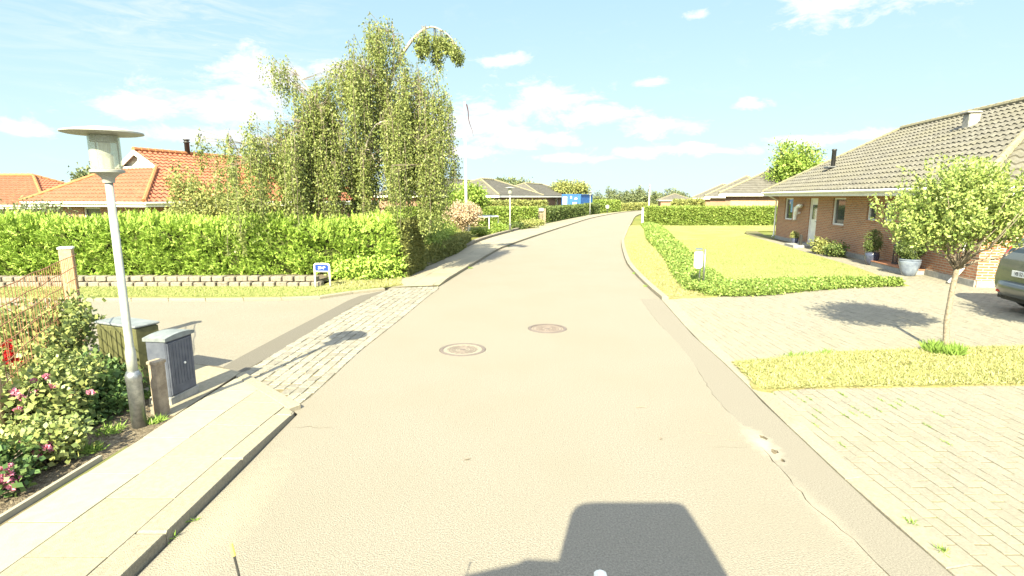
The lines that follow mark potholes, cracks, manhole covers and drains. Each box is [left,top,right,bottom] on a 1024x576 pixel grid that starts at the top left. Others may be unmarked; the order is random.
manhole cover [528,324,567,333]
manhole cover [440,343,486,356]
crack [764,450,890,576]
